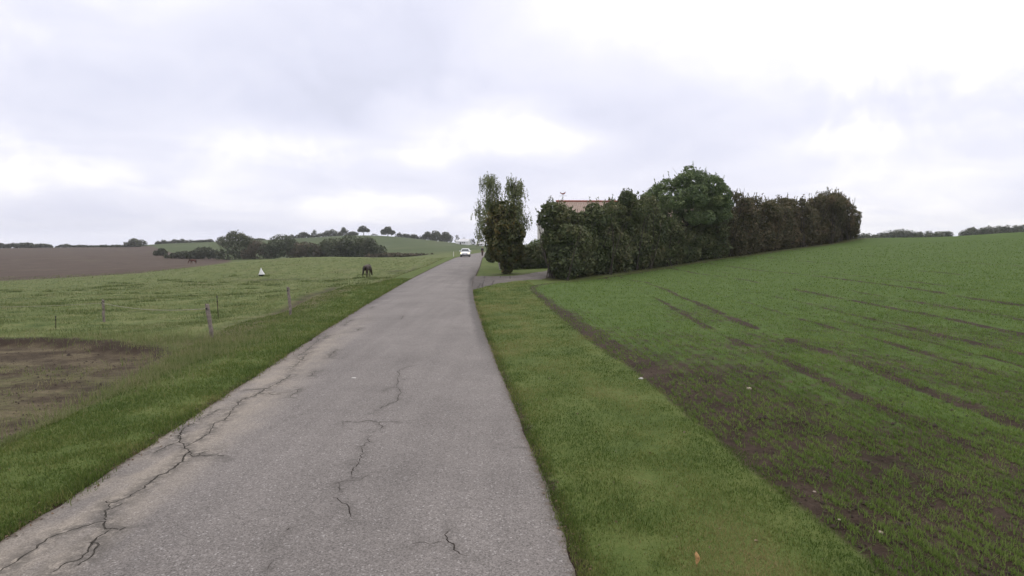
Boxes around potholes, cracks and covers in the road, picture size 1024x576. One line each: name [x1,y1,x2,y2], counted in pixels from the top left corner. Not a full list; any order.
crack [333,367,406,518]
crack [0,377,287,572]
